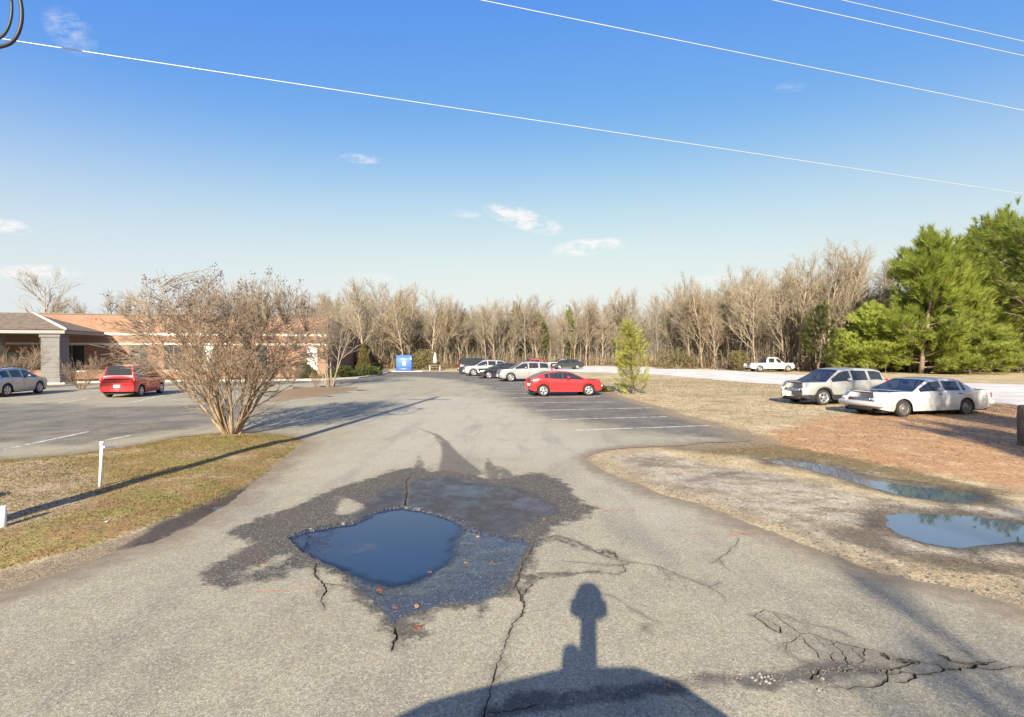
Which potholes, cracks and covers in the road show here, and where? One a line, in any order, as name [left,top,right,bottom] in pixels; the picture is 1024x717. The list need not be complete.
pothole [281,505,538,632]
crack [747,610,1024,690]
crack [313,562,352,607]
crack [404,473,412,506]
crack [483,535,725,717]
